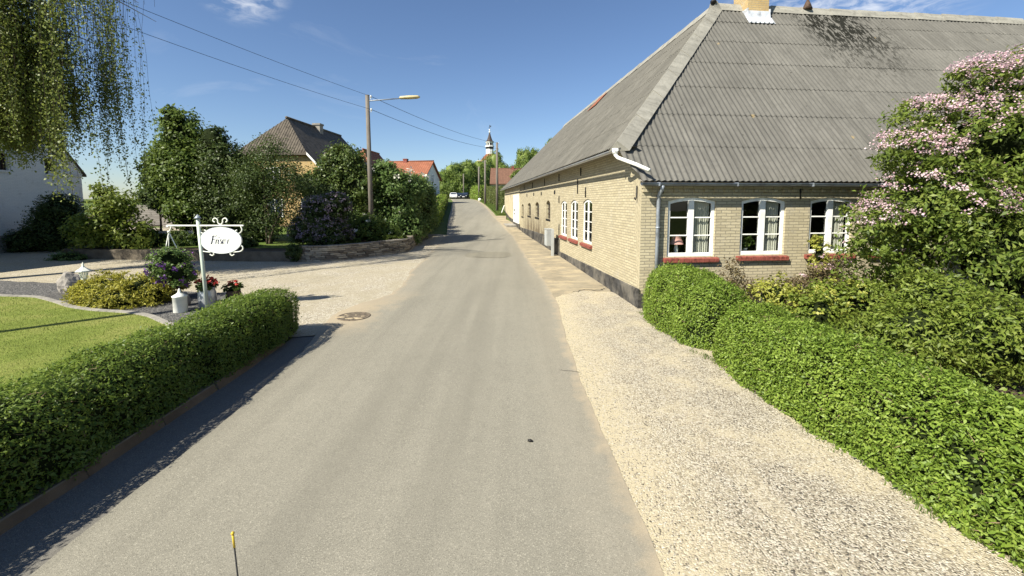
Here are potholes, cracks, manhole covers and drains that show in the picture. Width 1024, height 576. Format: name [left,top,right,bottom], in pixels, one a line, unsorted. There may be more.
manhole cover [335,312,371,321]
